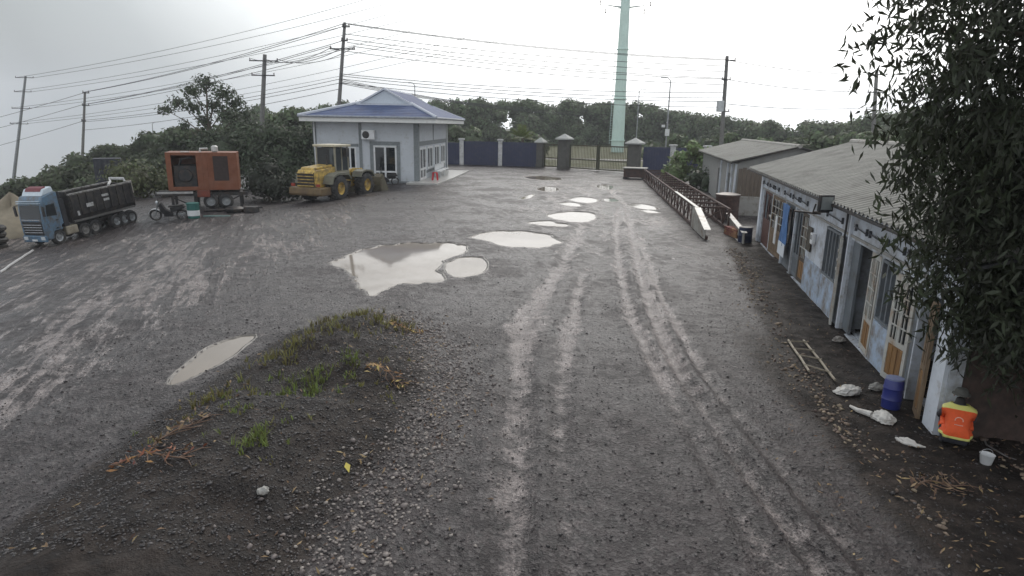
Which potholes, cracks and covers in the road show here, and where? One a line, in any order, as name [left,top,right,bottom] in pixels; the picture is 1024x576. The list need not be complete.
pothole [469,230,563,248]
pothole [439,256,489,278]
pothole [328,242,469,296]
pothole [166,334,257,385]
pothole [546,211,598,222]
